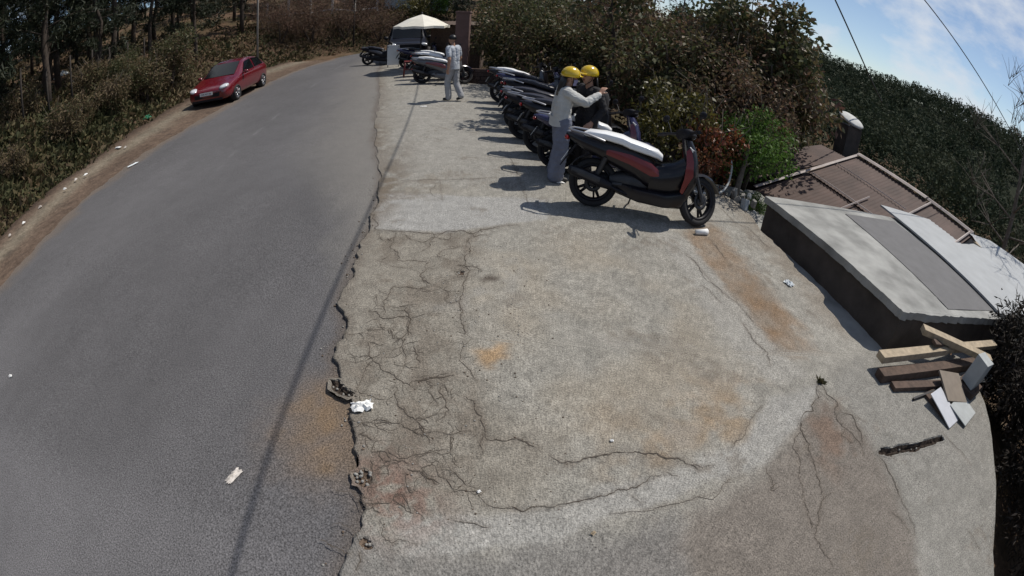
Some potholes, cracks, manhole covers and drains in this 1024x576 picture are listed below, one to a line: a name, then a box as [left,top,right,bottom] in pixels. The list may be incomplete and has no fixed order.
crack [467,398,534,450]
crack [549,451,711,476]
pothole [327,378,359,400]
crack [457,475,723,528]
pothole [350,466,377,490]
crack [766,384,866,563]
crack [333,214,518,543]
